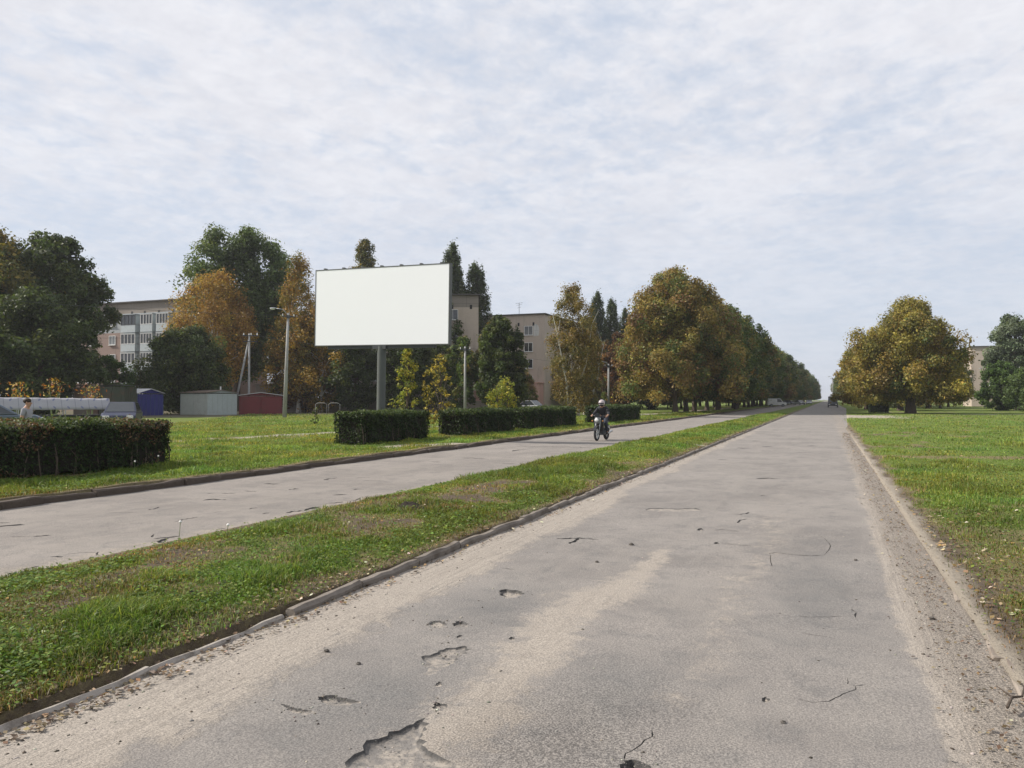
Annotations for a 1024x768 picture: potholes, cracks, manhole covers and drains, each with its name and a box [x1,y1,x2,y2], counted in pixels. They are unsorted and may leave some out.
pothole [499,589,524,599]
pothole [318,695,361,706]
pothole [421,646,470,675]
pothole [345,717,461,768]
crack [792,678,866,703]
